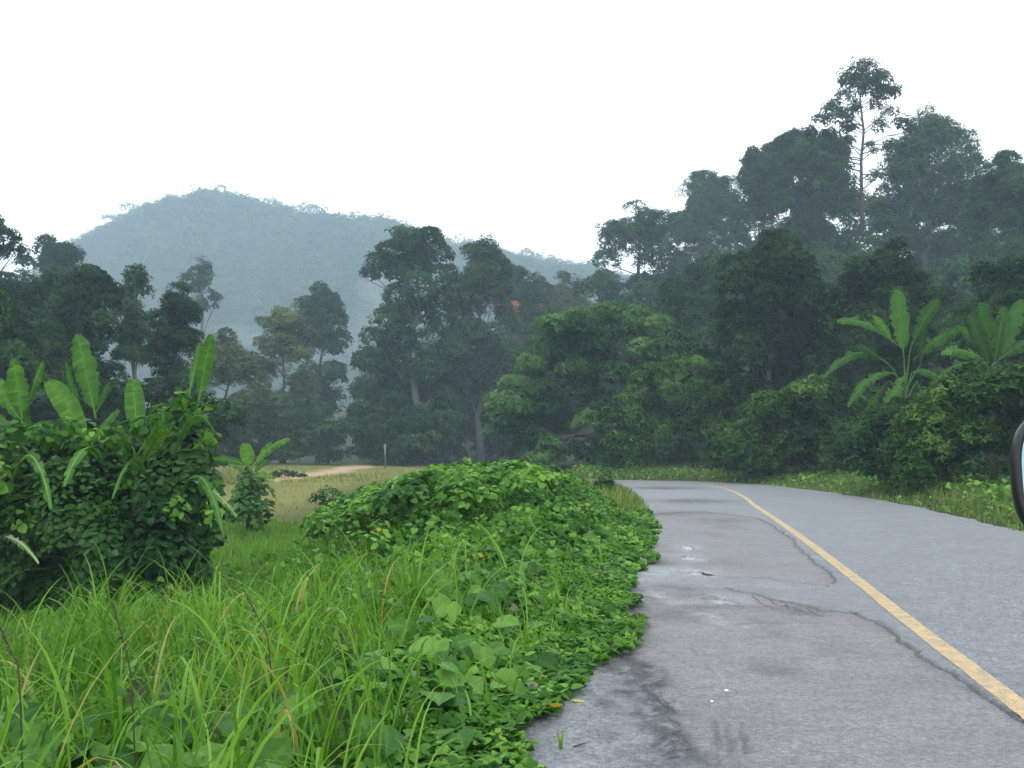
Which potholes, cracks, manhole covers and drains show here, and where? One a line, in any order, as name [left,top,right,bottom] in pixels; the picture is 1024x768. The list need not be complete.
crack [654,511,1024,731]
pothole [674,569,725,578]
pothole [670,543,704,551]
